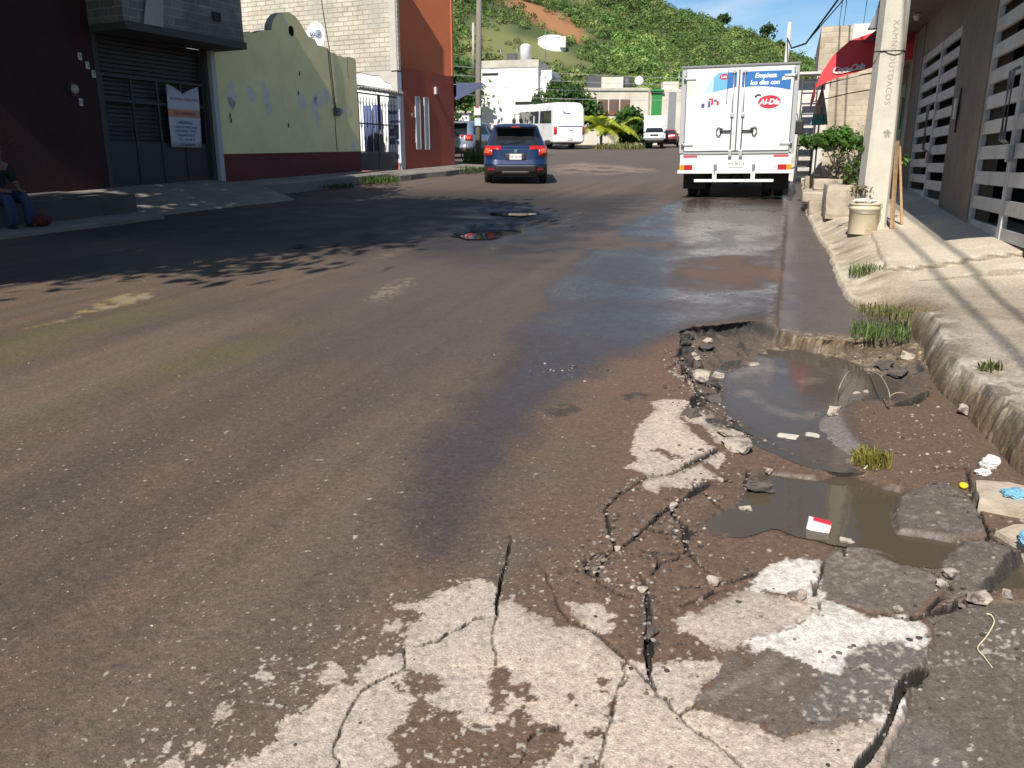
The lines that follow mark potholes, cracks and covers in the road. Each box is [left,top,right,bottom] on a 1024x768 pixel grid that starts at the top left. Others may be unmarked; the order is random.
crack [854,666,930,768]
crack [332,535,511,768]
crack [514,725,559,768]
pothole [448,223,525,241]
pothole [976,548,1024,592]
pothole [678,321,931,476]
pothole [702,473,964,568]
crack [811,547,847,611]
crack [545,354,773,768]
